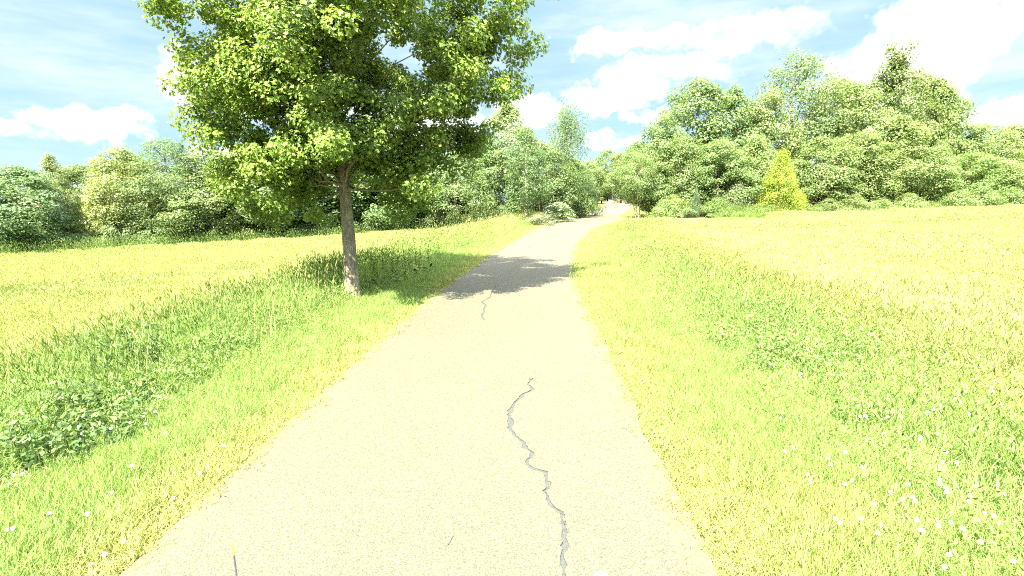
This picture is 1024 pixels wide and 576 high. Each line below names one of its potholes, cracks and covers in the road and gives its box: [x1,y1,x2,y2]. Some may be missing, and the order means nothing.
crack [507,378,569,576]
